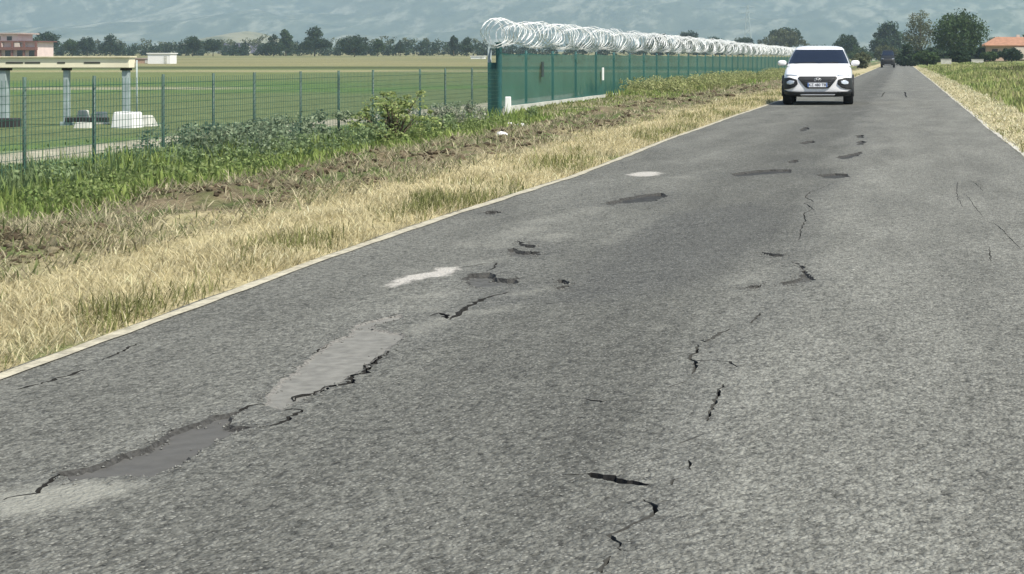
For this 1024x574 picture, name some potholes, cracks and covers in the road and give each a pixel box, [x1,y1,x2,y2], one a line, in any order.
pothole [731,169,791,177]
crack [955,182,1021,260]
crack [16,344,137,390]
pothole [451,272,526,289]
pothole [501,247,546,257]
crack [430,262,508,320]
pothole [606,193,667,205]
crack [565,435,701,573]
